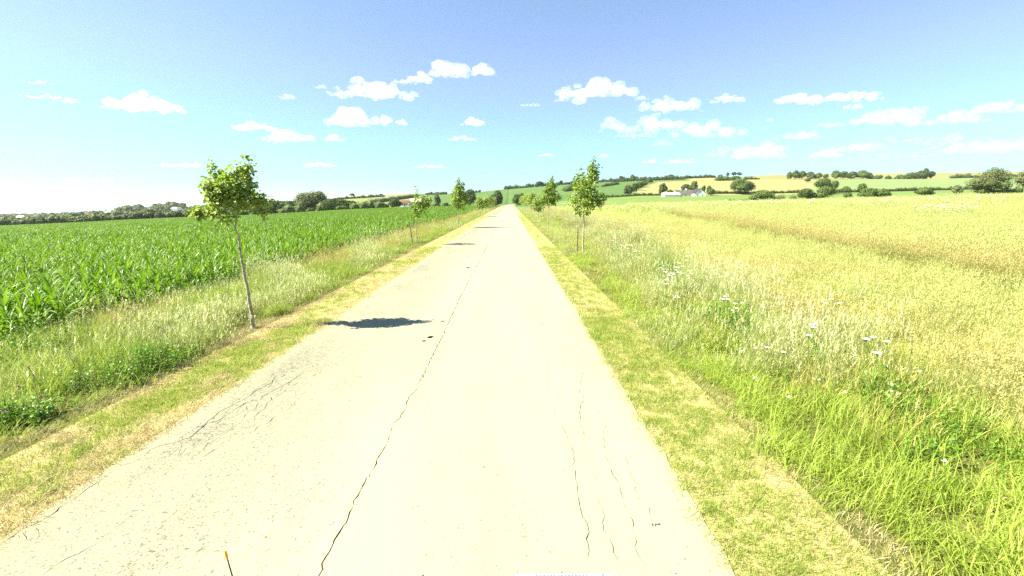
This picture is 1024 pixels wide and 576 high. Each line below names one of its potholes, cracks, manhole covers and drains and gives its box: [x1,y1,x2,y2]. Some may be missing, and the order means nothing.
crack [318,230,495,576]
crack [547,353,650,573]
crack [134,363,324,462]
